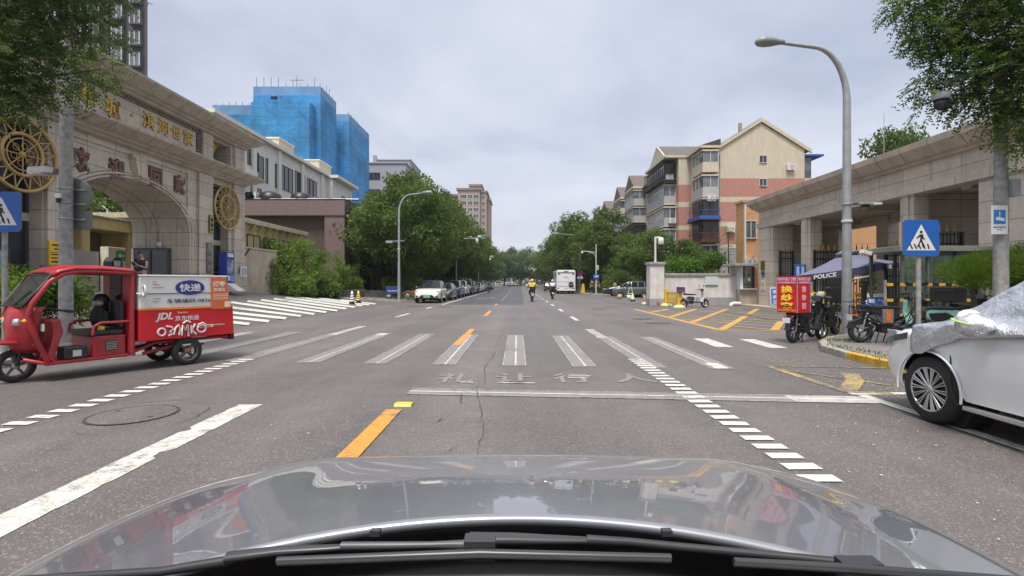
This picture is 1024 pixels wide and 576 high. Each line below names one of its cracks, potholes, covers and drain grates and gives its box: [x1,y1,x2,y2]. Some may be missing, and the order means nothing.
crack [267,353,495,455]
manhole cover [82,405,180,425]
